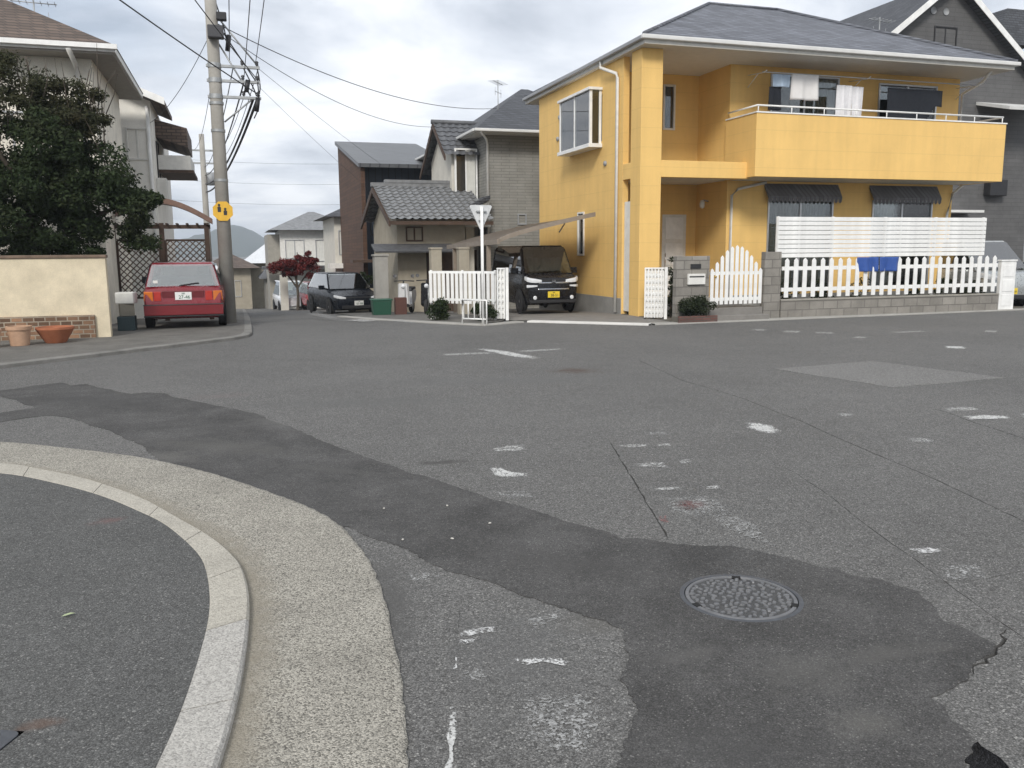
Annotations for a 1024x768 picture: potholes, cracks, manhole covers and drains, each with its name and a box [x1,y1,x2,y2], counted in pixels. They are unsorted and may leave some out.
manhole cover [680,574,804,622]
pothole [964,742,1009,768]
crack [777,464,1024,674]
crack [641,361,1024,522]
manhole cover [0,730,18,751]
